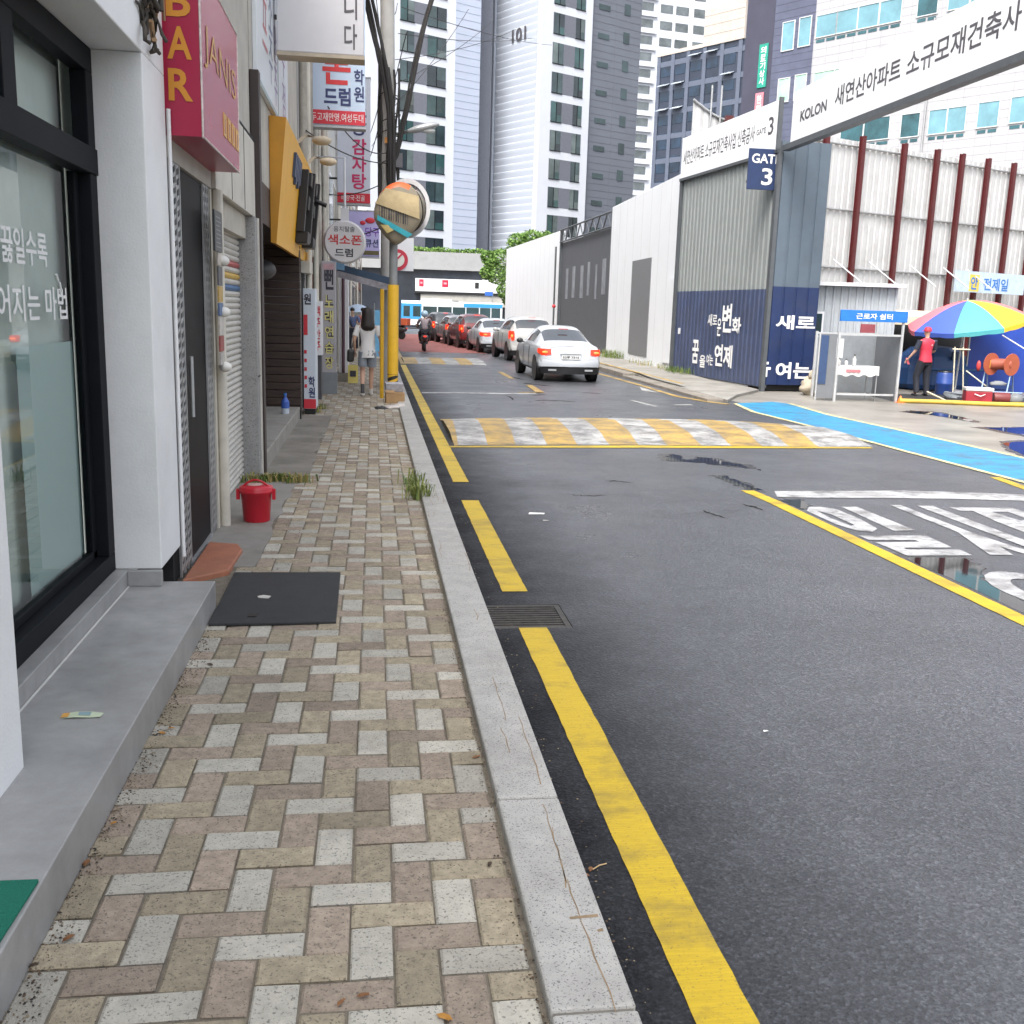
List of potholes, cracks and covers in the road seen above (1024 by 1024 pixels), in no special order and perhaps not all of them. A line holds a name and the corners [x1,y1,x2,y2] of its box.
drain grate [486,604,573,629]
